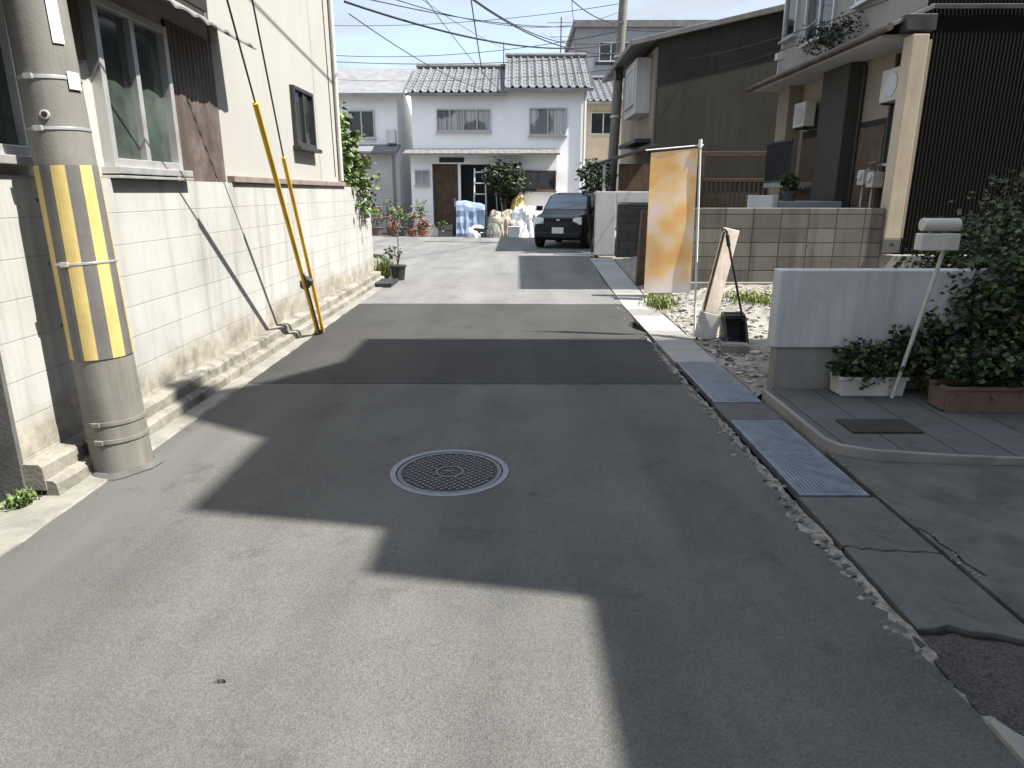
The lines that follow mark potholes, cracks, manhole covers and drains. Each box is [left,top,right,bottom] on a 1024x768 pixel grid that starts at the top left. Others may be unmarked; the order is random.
drain grate [730,420,870,501]
drain grate [676,362,762,406]
manhole cover [390,449,509,497]
